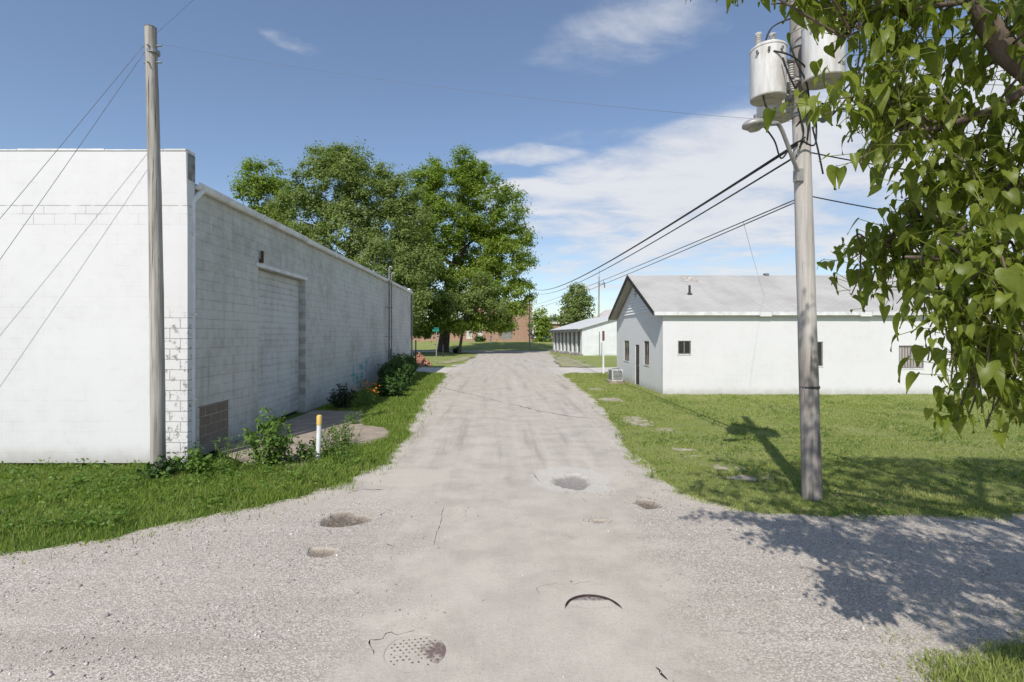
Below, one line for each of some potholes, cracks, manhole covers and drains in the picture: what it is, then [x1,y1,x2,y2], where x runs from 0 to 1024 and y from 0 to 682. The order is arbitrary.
pothole [307,547,340,558]
manhole cover [381,632,449,673]
pothole [550,473,591,490]
pothole [632,498,662,509]
pothole [319,511,373,527]
